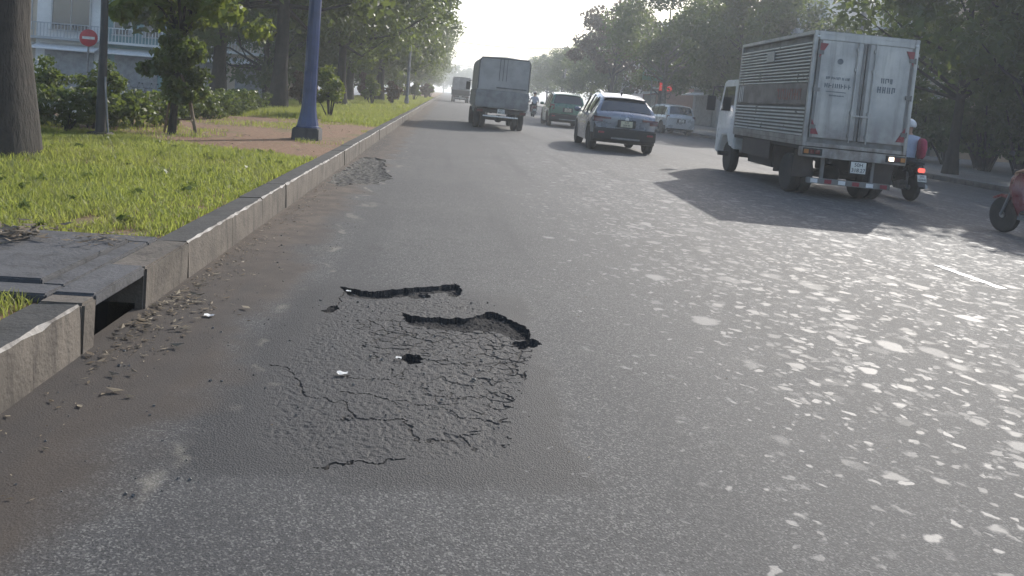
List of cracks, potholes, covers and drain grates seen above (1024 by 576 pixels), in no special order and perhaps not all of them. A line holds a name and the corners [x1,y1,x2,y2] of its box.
crack [313,458,405,470]
pothole [401,312,531,343]
crack [269,292,533,452]
pothole [511,339,542,350]
pothole [326,157,393,186]
pothole [340,283,462,299]
pothole [398,354,425,364]
